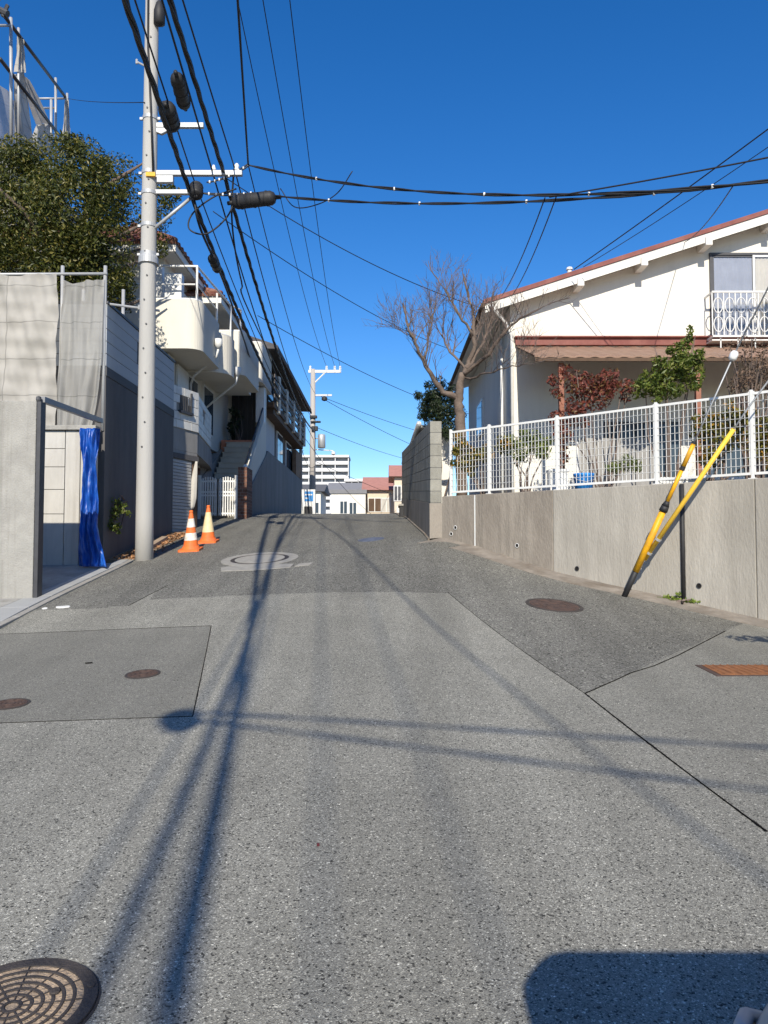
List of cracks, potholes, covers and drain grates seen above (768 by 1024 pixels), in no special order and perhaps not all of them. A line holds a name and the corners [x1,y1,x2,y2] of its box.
manhole cover [0,698,31,710]
manhole cover [525,598,584,612]
manhole cover [0,958,101,1024]
manhole cover [125,669,161,679]
